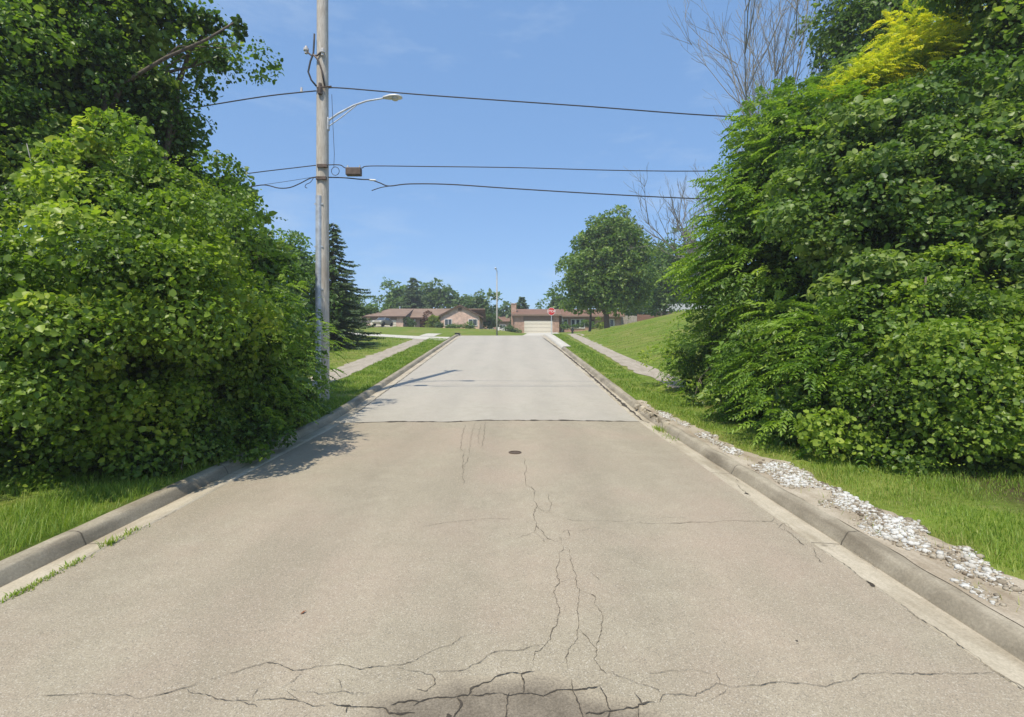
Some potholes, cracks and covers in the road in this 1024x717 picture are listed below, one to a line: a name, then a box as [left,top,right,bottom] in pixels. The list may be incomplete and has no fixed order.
crack [49,461,988,717]
